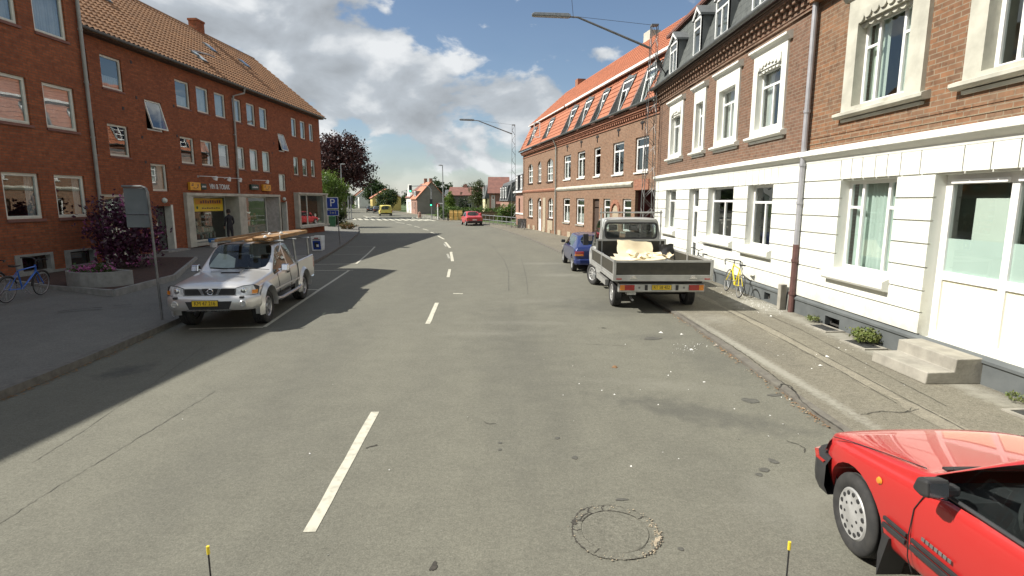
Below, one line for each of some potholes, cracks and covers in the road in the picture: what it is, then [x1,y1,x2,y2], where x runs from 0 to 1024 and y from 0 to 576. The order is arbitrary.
crack [680,314,843,431]
crack [0,452,115,523]
manhole cover [571,504,663,561]
